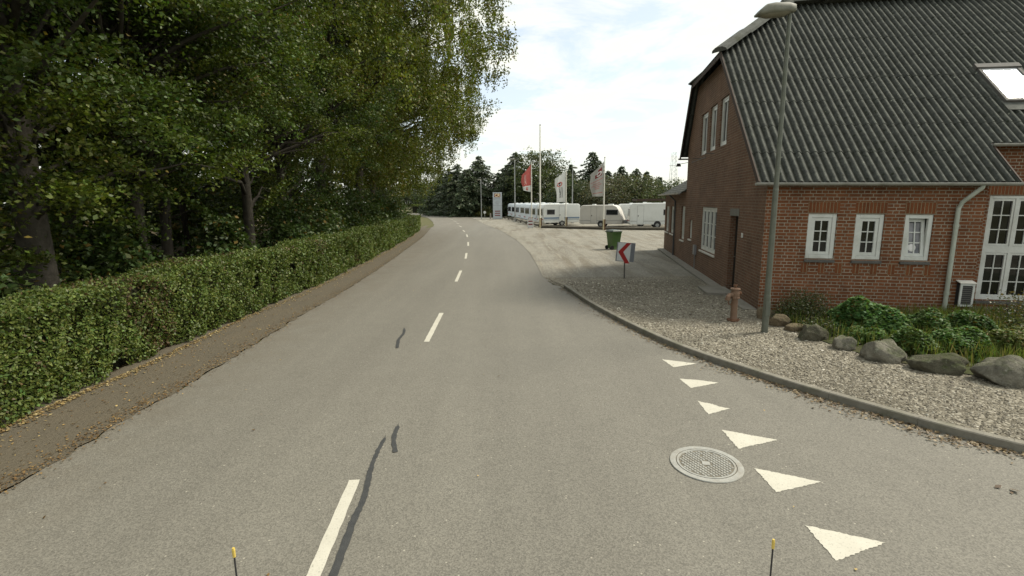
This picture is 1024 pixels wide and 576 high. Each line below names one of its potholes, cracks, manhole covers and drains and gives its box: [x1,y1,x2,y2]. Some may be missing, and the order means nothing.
manhole cover [669,446,744,483]
